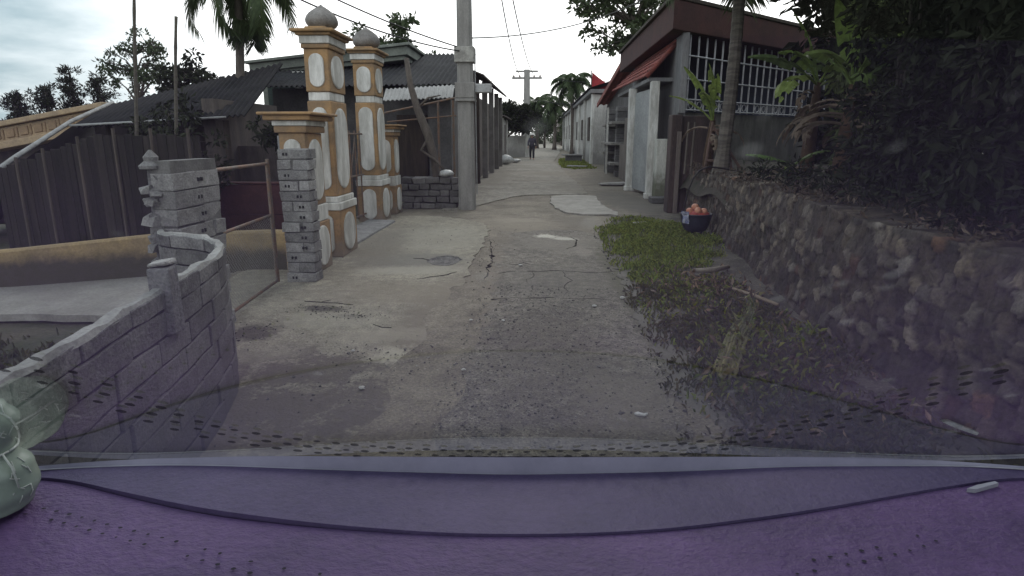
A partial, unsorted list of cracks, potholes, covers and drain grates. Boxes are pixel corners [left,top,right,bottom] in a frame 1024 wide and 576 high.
crack [484,242,614,300]
